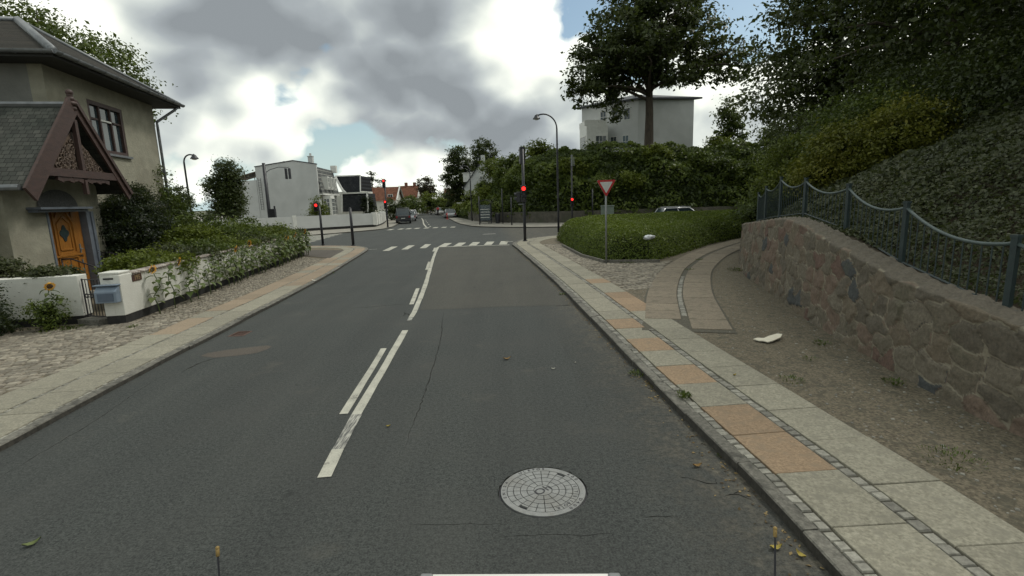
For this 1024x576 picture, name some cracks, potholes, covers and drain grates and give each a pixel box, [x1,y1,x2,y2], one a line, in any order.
manhole cover [499,468,588,518]
crack [410,523,616,537]
crack [403,314,444,450]
crack [679,476,753,501]
